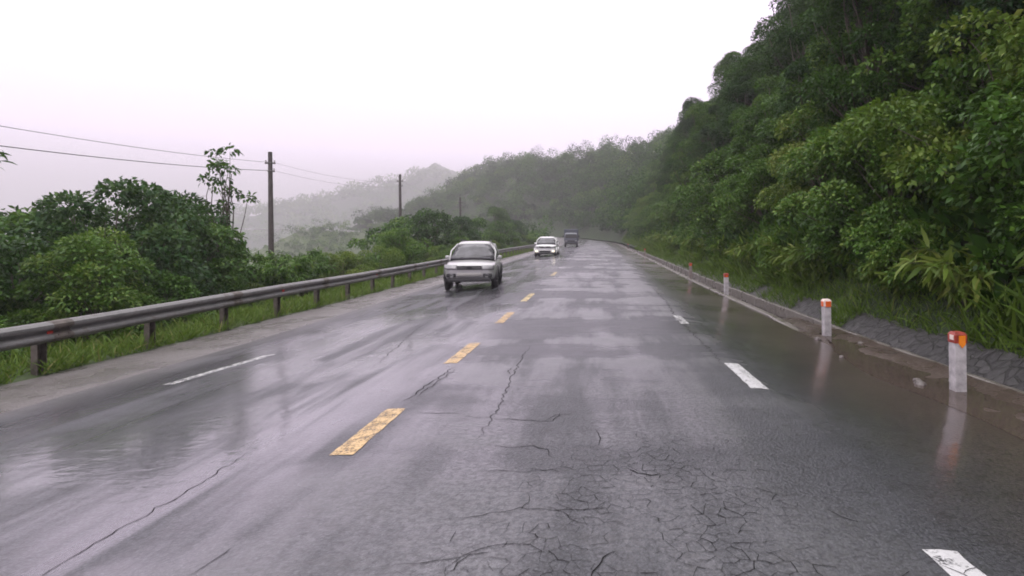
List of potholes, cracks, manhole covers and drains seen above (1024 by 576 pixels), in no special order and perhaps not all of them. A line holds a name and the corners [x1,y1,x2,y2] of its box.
crack [471,349,563,472]
crack [438,496,603,523]
crack [395,539,534,574]
